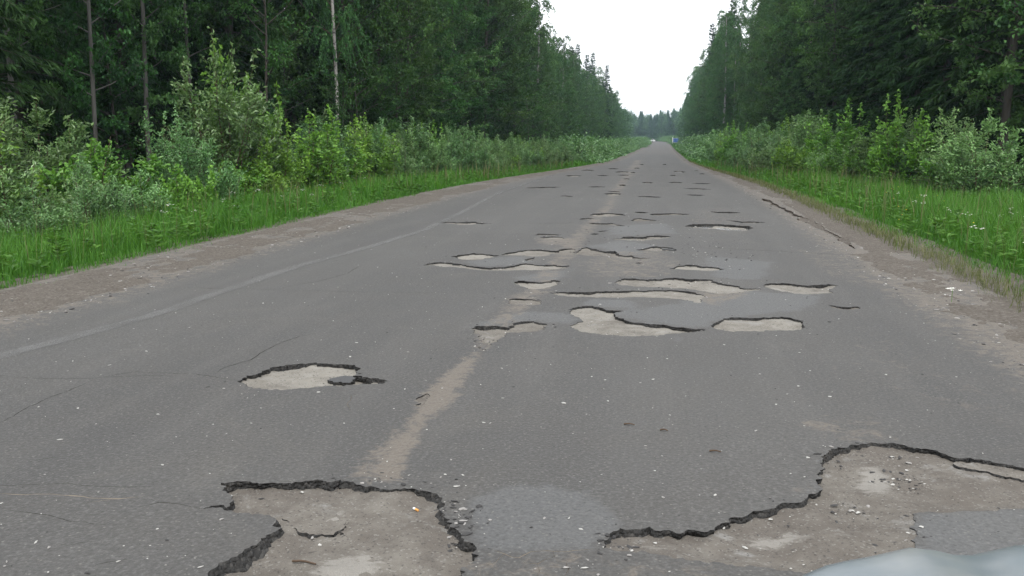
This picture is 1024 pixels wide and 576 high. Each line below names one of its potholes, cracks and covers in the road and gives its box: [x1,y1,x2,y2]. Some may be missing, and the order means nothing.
pothole [615,278,761,294]
pothole [502,249,576,257]
pothole [426,262,569,271]
pothole [569,306,703,336]
pothole [204,479,479,576]
pothole [239,363,387,390]
pothole [471,321,547,345]
pothole [514,280,561,290]
pothole [711,317,805,332]
pothole [764,283,837,294]
pothole [600,443,1024,573]
